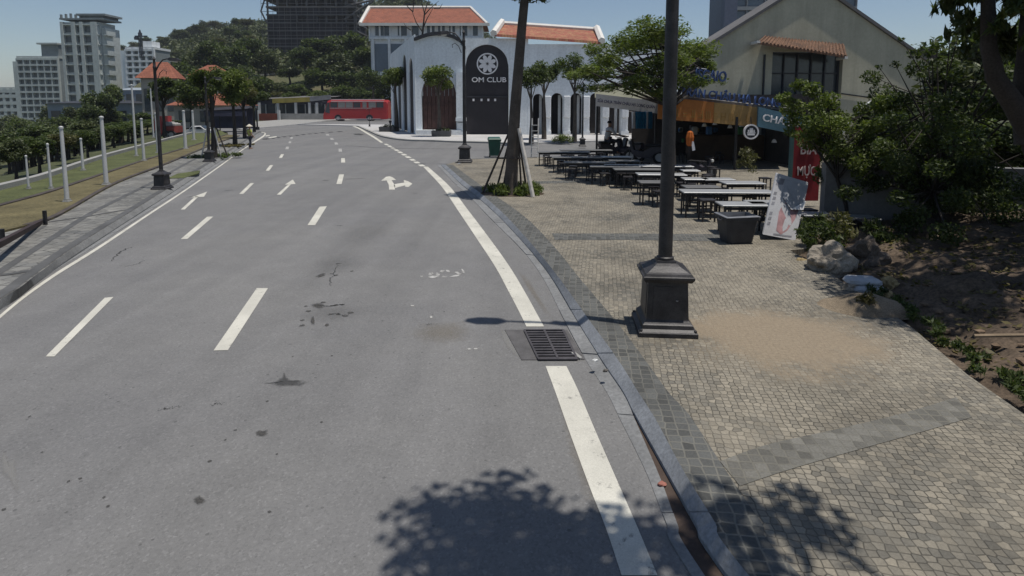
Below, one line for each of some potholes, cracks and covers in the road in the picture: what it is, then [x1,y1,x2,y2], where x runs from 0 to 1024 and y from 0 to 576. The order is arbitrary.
drain grate [505,329,585,360]
